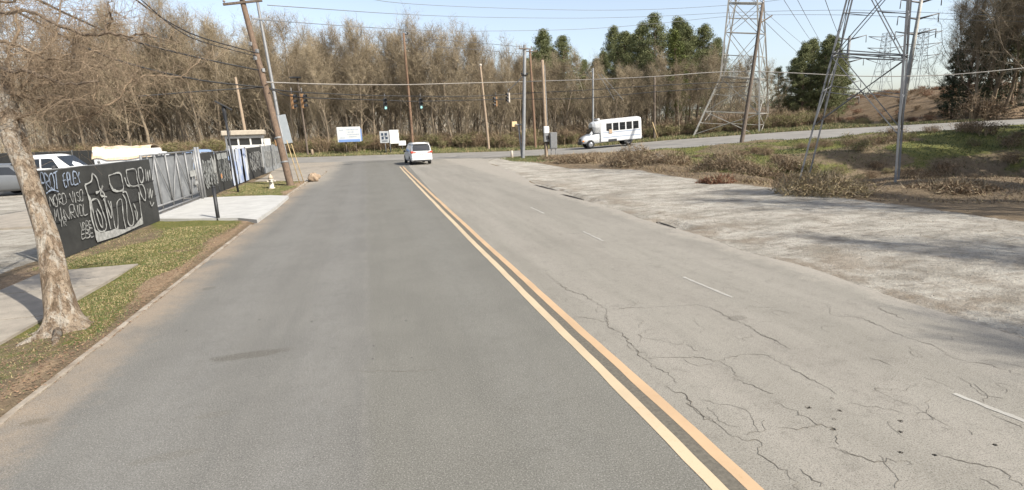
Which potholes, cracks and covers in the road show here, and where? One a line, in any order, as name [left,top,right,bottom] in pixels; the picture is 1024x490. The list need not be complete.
crack [549,247,1023,489]
